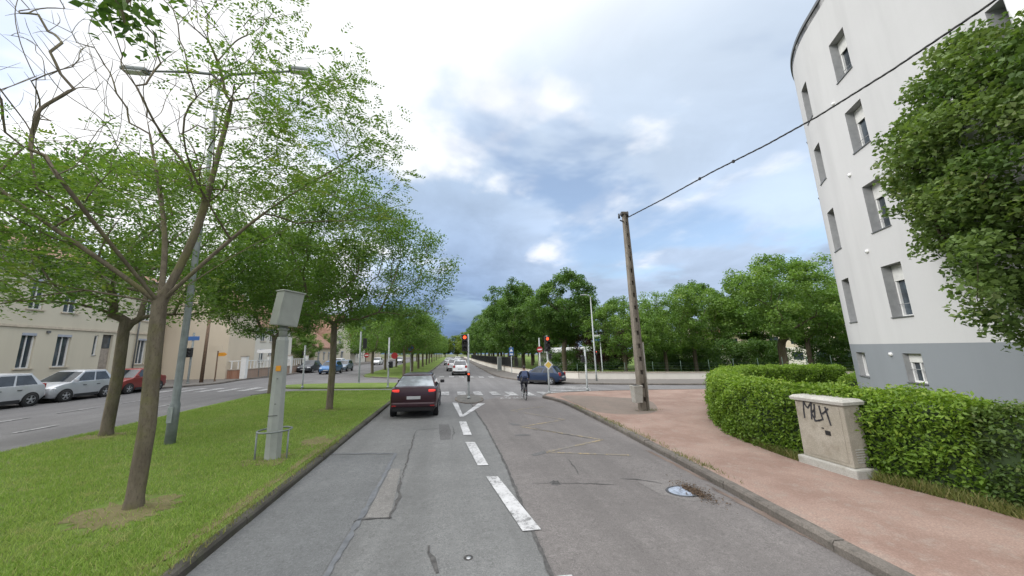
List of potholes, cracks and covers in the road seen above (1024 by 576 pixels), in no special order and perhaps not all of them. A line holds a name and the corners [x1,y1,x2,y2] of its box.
manhole cover [665,486,702,497]
crack [353,426,455,522]
crack [428,545,439,573]
